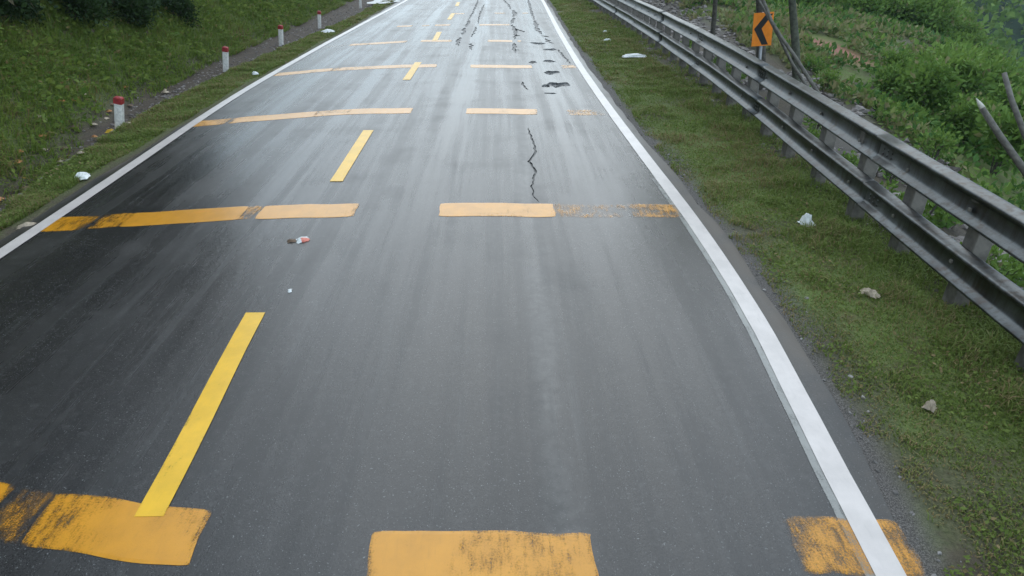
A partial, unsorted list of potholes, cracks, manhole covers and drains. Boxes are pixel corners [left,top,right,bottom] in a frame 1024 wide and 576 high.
crack [527,128,539,202]
crack [456,0,485,50]
crack [503,0,570,64]
